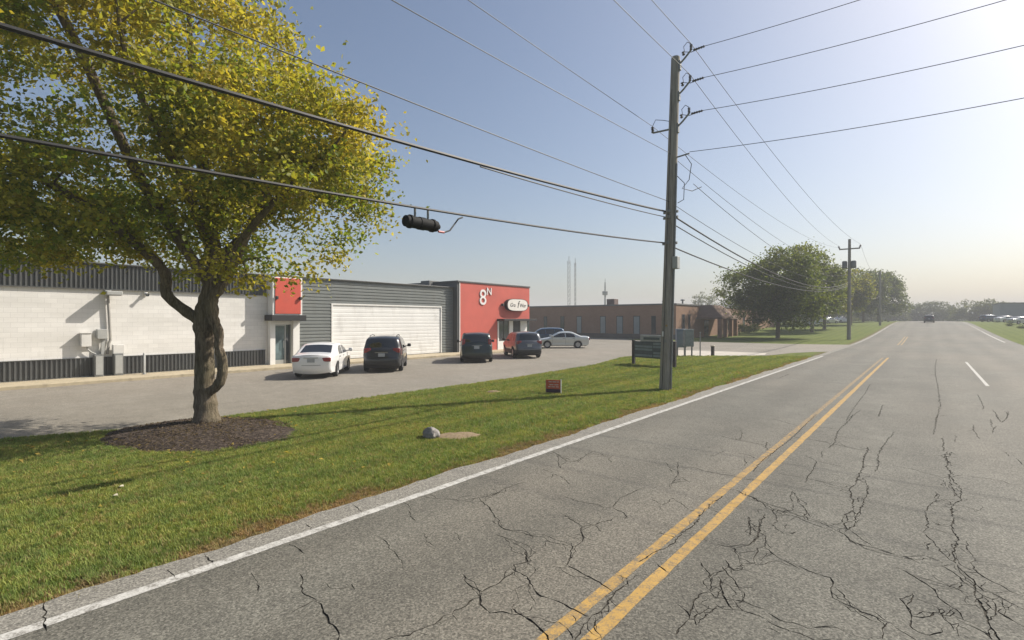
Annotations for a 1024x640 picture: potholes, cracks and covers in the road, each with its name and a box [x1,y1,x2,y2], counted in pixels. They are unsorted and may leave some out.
crack [386,386,1024,640]
crack [291,573,355,640]
